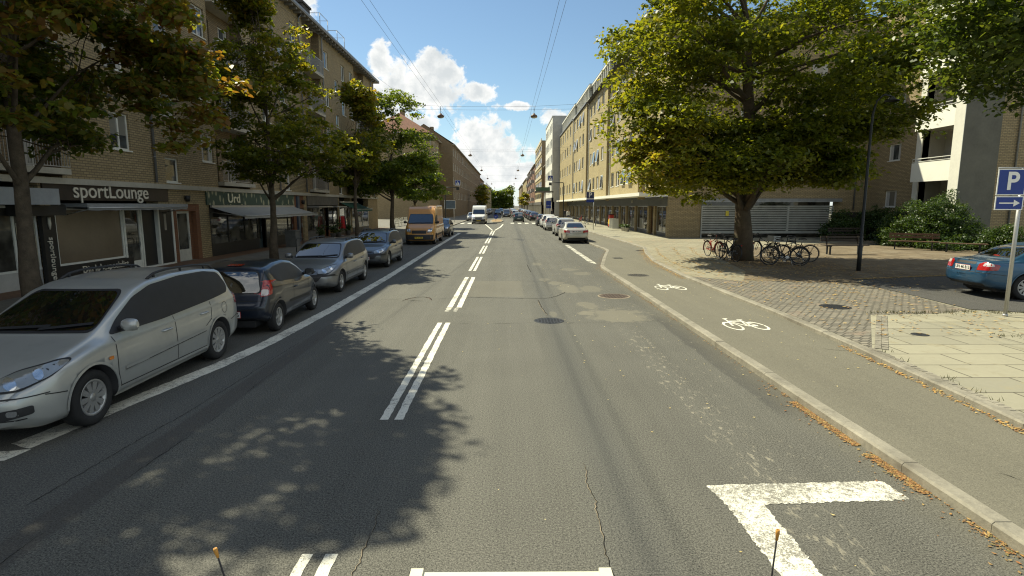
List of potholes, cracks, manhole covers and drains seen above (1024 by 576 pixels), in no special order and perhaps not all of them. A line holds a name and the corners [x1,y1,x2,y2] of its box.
crack [585,466,615,576]
crack [351,507,380,576]
